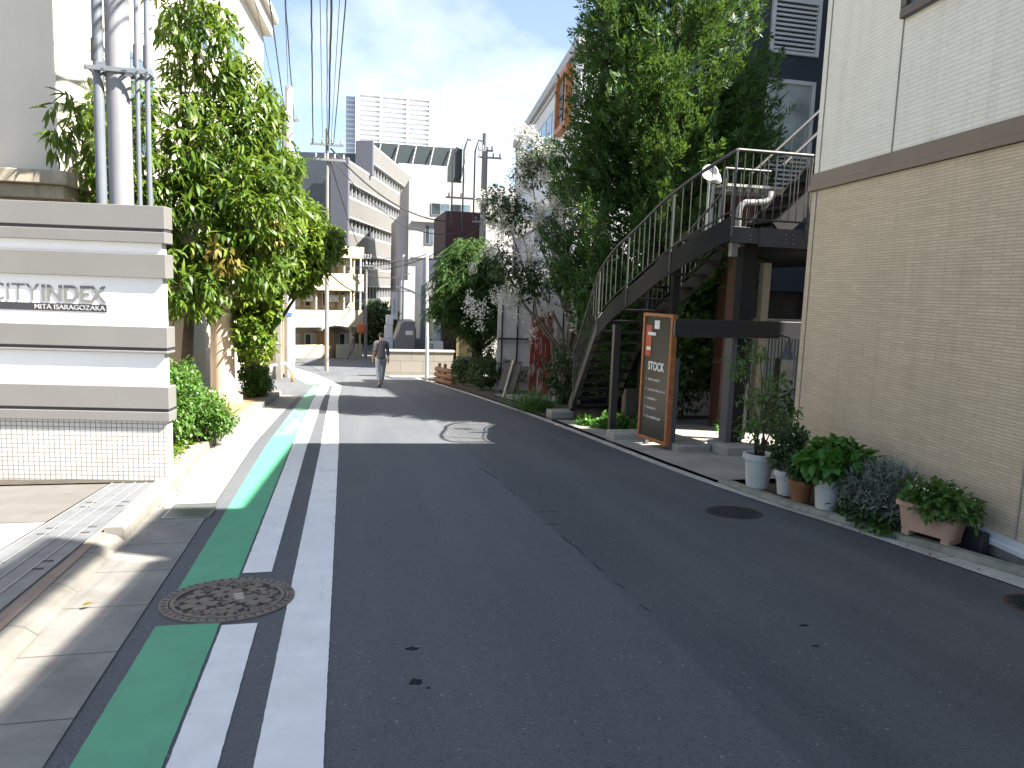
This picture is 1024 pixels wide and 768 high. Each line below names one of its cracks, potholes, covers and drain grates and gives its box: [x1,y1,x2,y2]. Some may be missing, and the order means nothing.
drain grate [161,503,220,519]
manhole cover [705,506,763,519]
manhole cover [1002,593,1024,612]
manhole cover [158,578,295,624]
crack [481,468,652,613]
